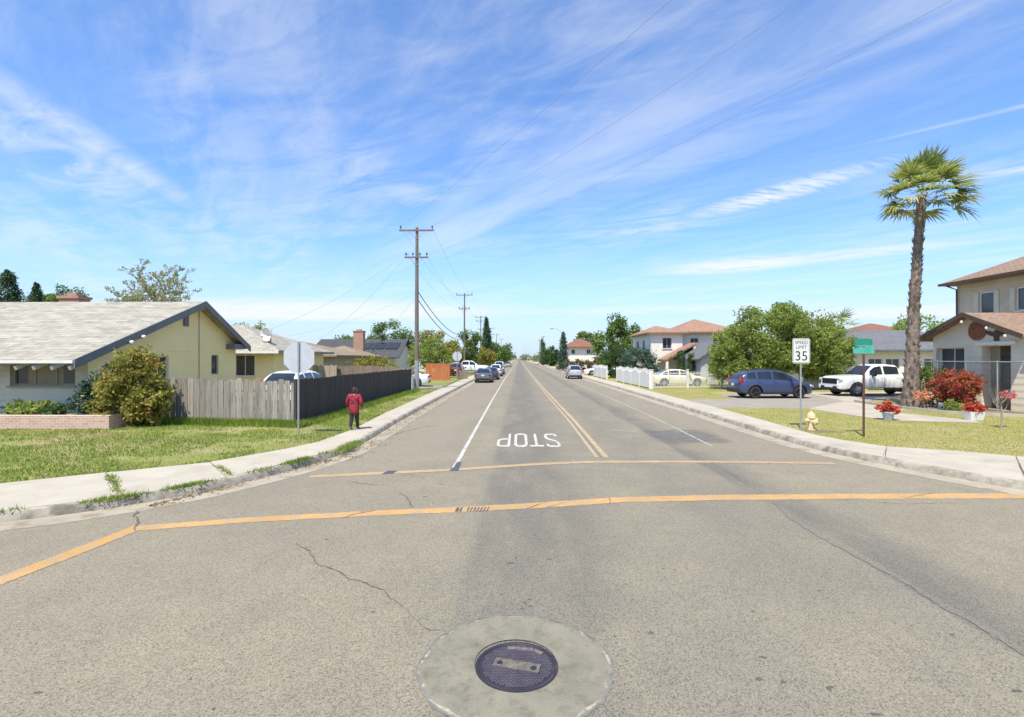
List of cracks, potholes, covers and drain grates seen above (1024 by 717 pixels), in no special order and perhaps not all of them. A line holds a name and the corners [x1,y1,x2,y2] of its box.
manhole cover [475,642,558,693]
crack [773,502,1024,655]
crack [104,473,139,532]
crack [296,543,614,717]
